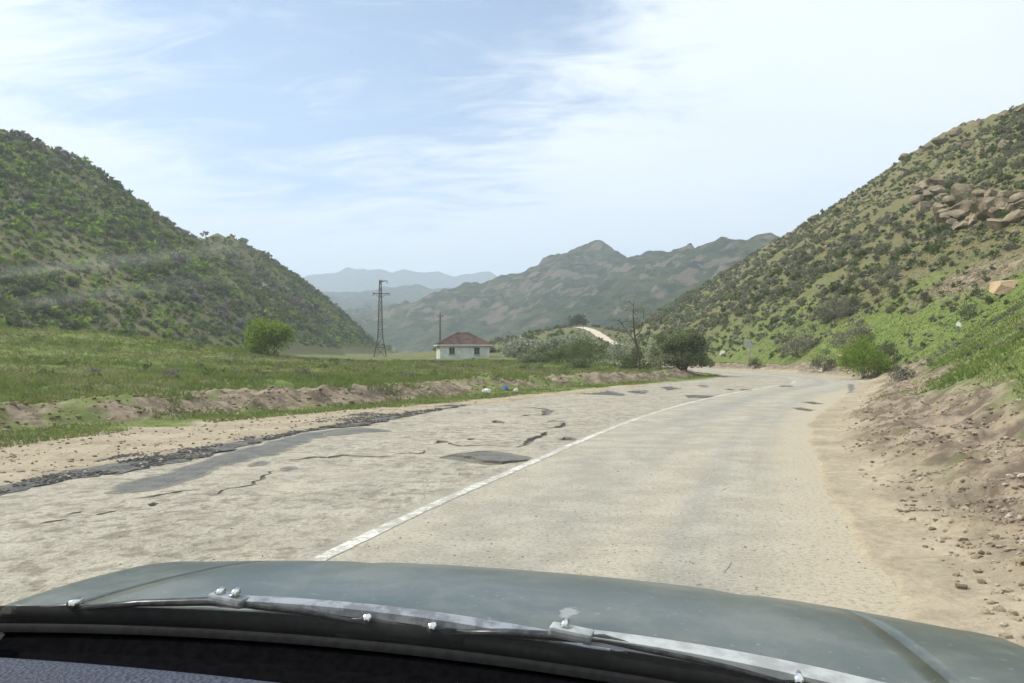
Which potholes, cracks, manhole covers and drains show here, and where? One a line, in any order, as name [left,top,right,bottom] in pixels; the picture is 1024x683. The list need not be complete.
crack [296,450,426,460]
crack [215,470,275,495]
crack [41,510,118,524]
crack [448,407,564,447]
